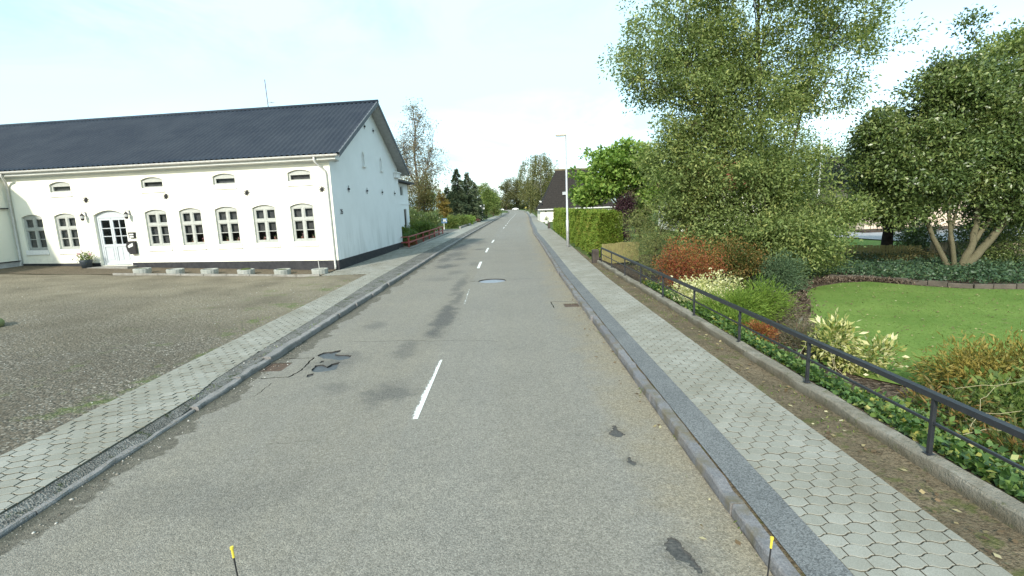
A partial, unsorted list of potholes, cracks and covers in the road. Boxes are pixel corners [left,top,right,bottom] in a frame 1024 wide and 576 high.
pothole [317,350,352,360]
pothole [664,537,703,574]
pothole [312,362,340,372]
